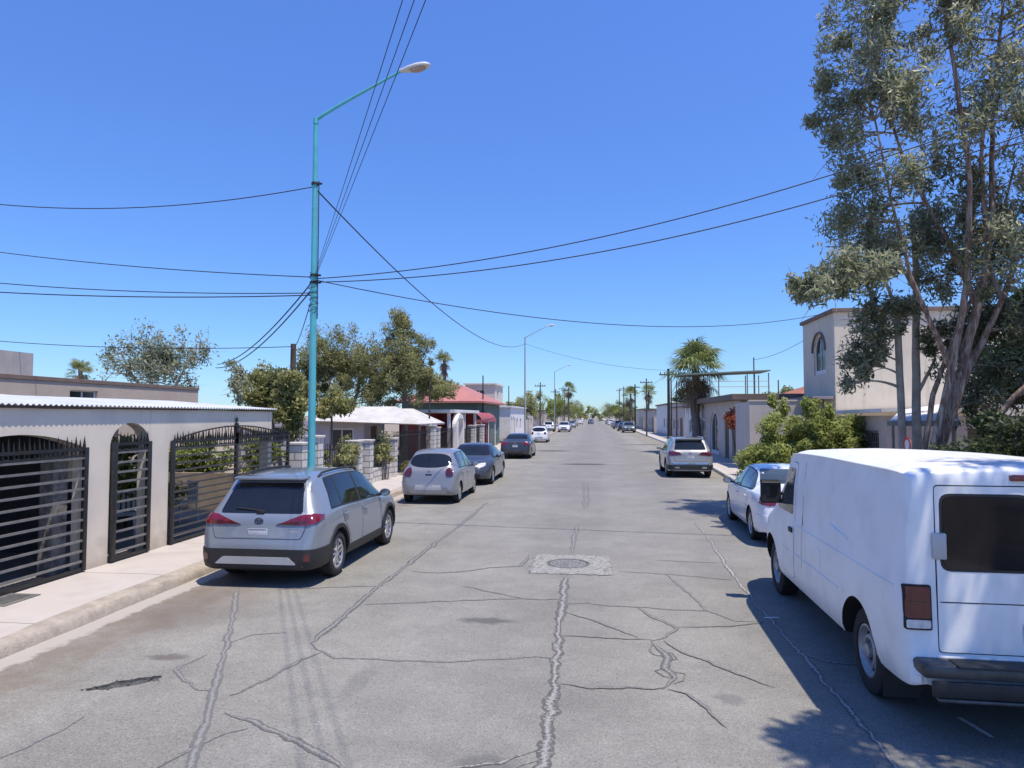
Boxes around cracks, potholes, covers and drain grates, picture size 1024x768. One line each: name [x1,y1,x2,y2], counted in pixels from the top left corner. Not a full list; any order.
manhole cover [528,554,613,575]
crack [376,555,773,728]
crack [172,654,207,691]
crack [582,481,590,509]
pothole [81,675,162,691]
crack [152,712,345,768]
